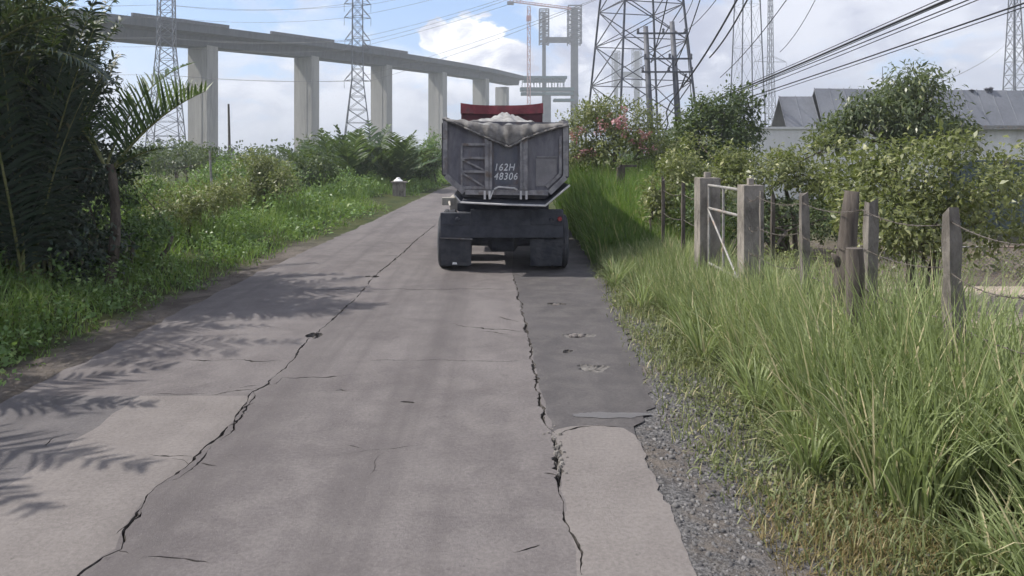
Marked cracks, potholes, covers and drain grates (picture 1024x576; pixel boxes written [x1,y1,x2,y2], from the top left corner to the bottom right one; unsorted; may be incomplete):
crack [456,275,618,575]
crack [77,224,436,576]
pothole [577,364,609,373]
